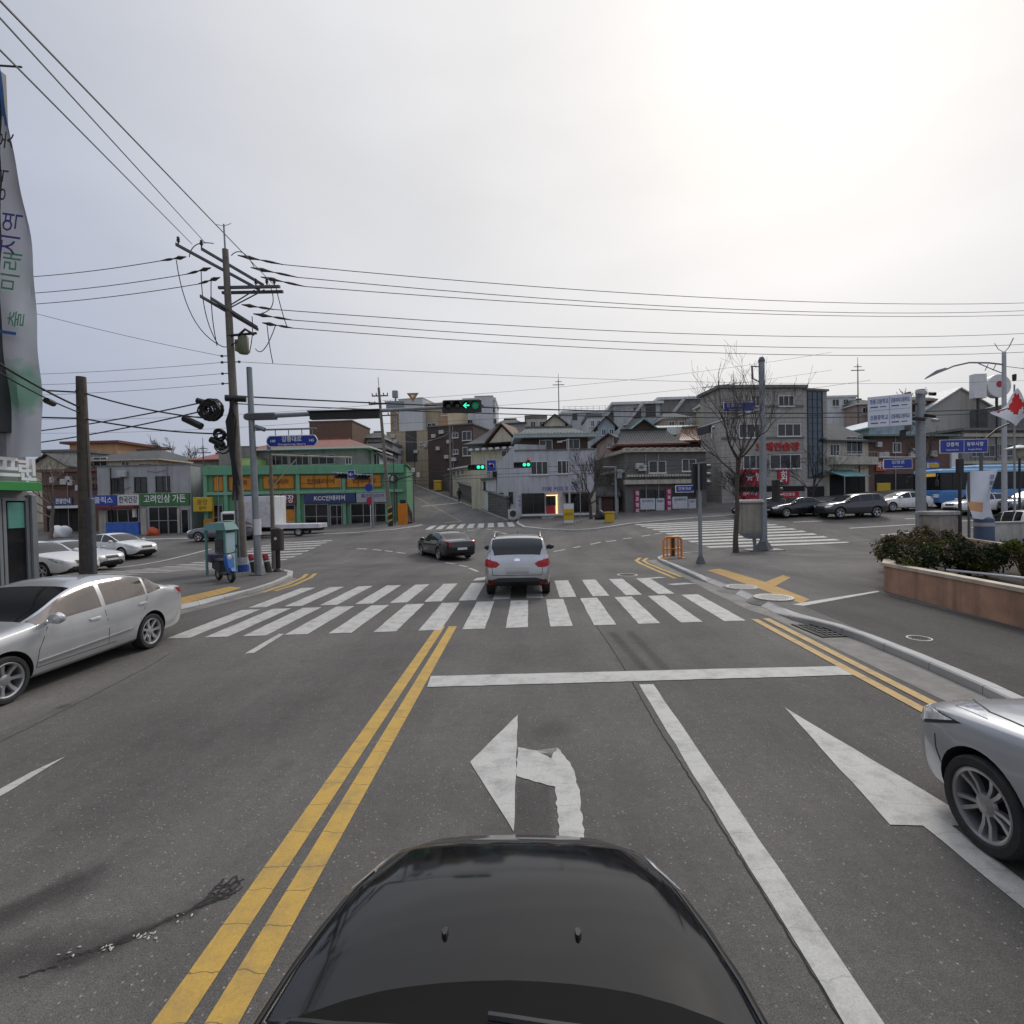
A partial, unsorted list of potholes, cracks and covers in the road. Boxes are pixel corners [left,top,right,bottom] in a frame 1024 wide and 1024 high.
crack [18,875,244,978]
drain grate [791,624,847,638]
manhole cover [716,584,760,595]
manhole cover [746,594,795,606]
